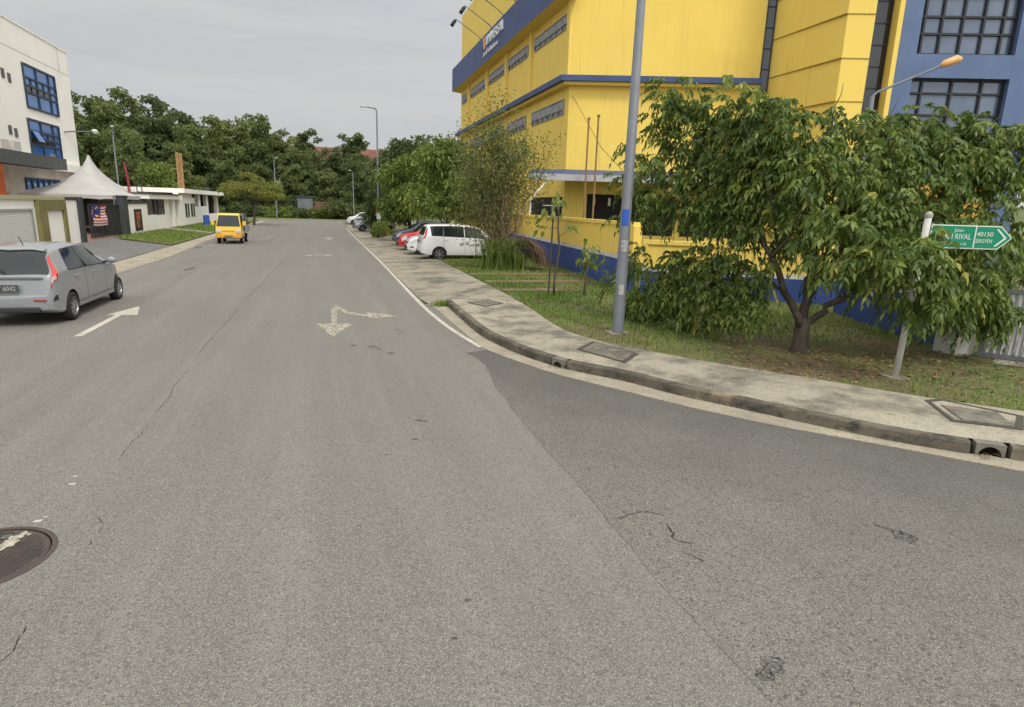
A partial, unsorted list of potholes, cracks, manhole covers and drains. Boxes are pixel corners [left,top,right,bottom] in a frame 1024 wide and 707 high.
utility cover [467,299,503,307]
pothole [754,656,785,682]
crack [0,610,28,663]
drain grate [549,356,569,369]
utility cover [577,341,639,363]
utility cover [925,399,1024,430]
manhole cover [0,526,58,584]
drain grate [970,438,1007,459]
crack [611,511,704,562]
